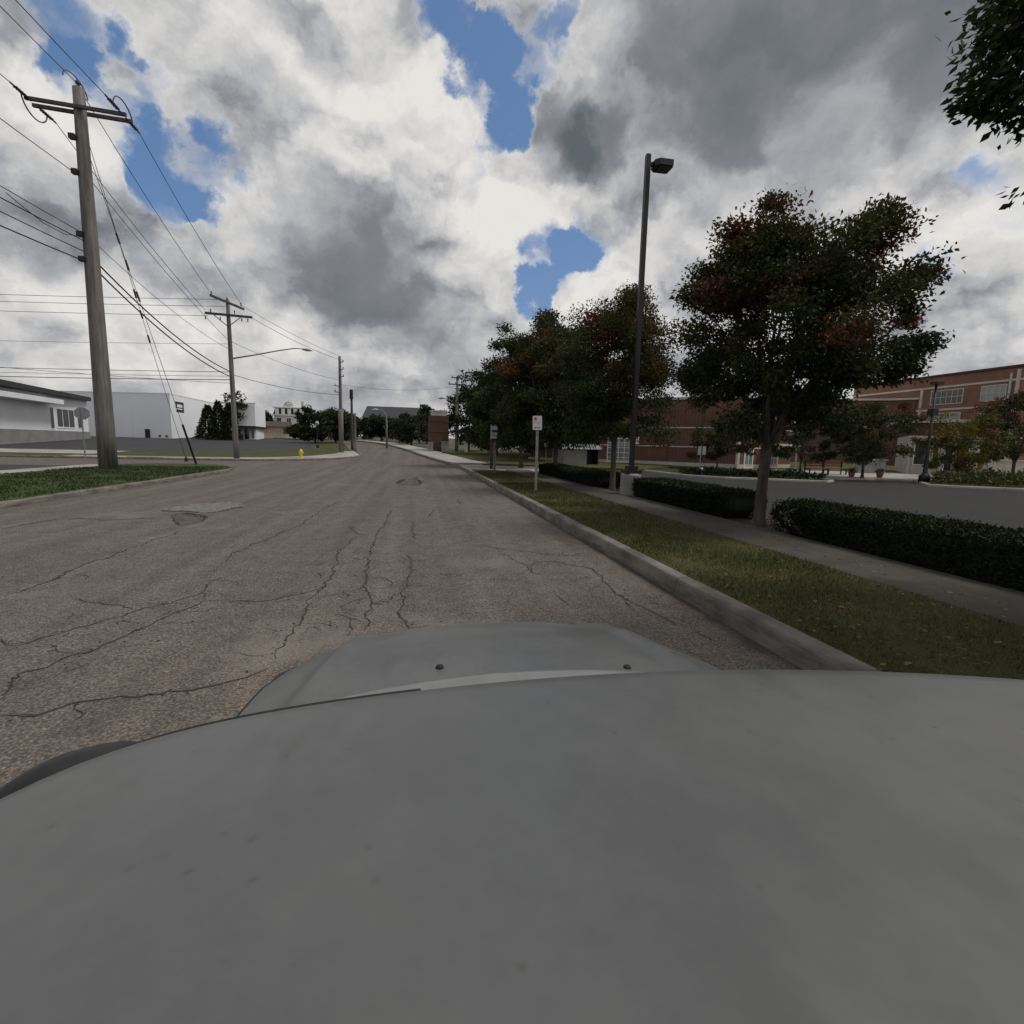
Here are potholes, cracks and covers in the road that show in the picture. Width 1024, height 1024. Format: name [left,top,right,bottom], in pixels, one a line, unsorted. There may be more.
pothole [396,477,423,486]
pothole [170,513,208,525]
crack [463,544,706,628]
crack [0,501,465,723]
